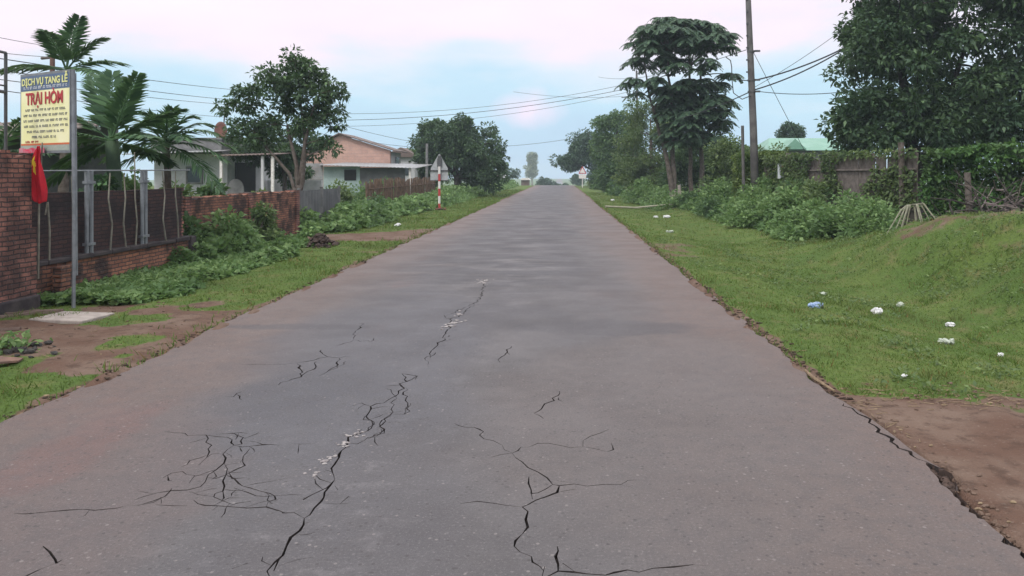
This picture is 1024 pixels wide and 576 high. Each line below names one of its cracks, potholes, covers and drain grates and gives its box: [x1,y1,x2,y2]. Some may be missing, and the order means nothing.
crack [23,374,417,576]
crack [842,403,1024,558]
crack [242,323,374,385]
crack [424,279,488,363]
crack [456,424,704,576]
